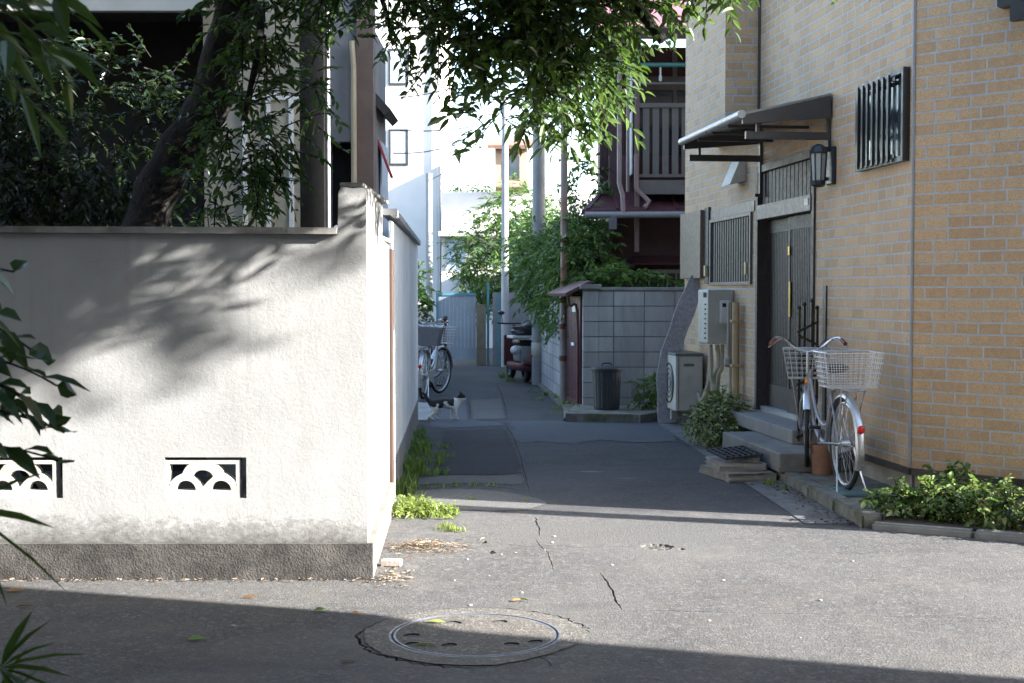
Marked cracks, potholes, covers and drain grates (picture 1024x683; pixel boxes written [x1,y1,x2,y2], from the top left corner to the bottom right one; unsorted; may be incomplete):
drain grate [707,445,763,460]
crack [354,573,1008,669]
manhole cover [364,608,587,665]
crack [482,518,620,571]
